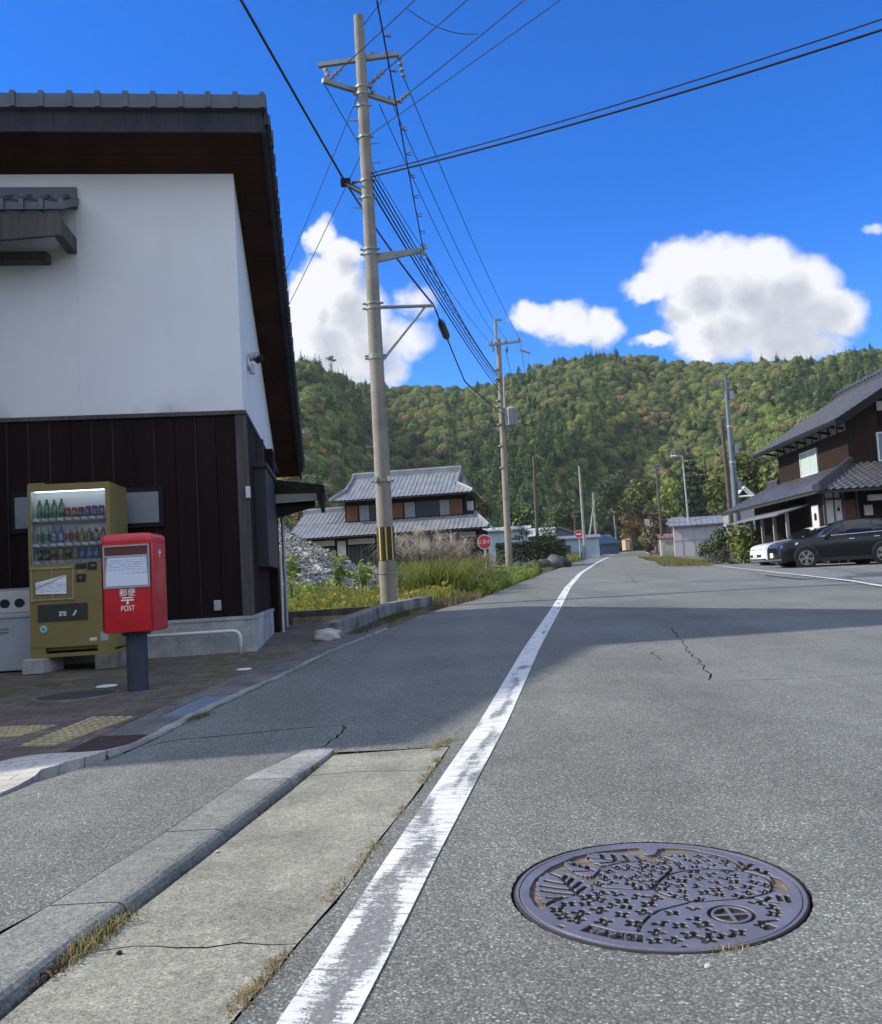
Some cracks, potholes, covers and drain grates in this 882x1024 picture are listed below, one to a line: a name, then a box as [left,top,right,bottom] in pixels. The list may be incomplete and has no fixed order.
manhole cover [511,842,814,955]
crack [95,942,300,952]
manhole cover [32,689,120,703]
crack [651,627,882,683]
